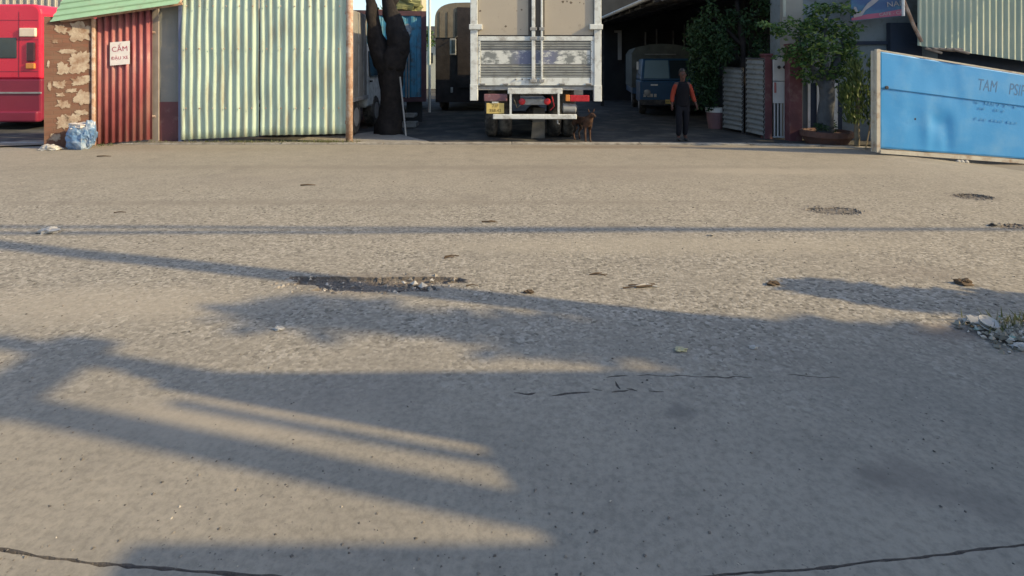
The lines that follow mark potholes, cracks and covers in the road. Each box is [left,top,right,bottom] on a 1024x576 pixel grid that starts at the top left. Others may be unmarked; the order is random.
pothole [270,272,470,294]
pothole [802,205,867,216]
pothole [998,222,1024,230]
crack [515,374,838,396]
